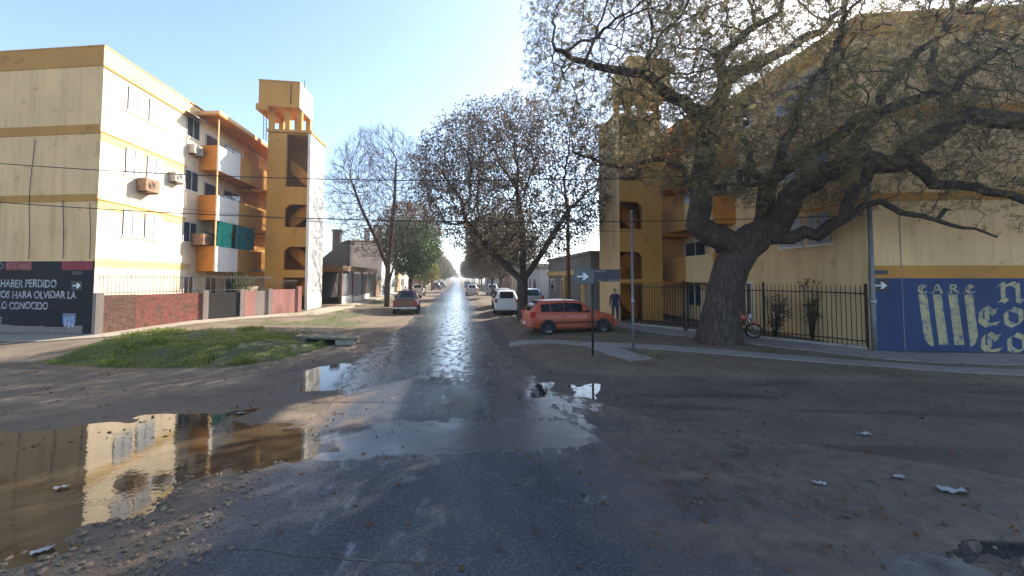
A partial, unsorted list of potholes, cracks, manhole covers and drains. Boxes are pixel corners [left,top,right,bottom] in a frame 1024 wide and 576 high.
pothole [945,539,1024,576]
crack [234,548,468,567]
